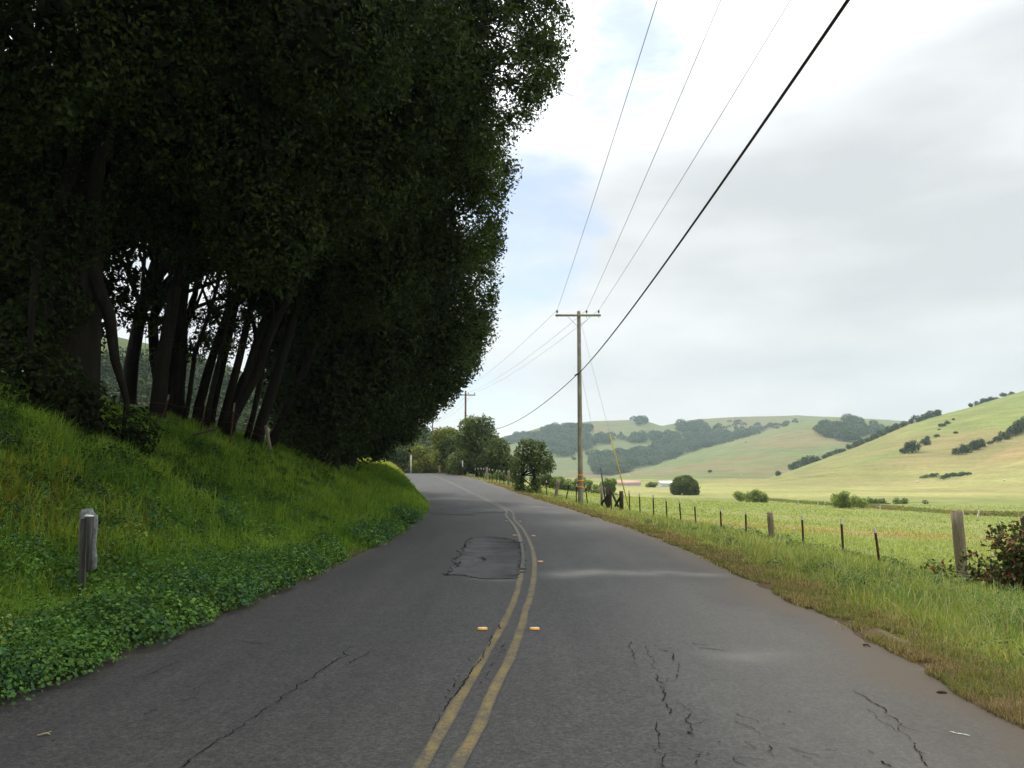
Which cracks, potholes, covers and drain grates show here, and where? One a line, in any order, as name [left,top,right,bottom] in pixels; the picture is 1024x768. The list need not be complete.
crack [853,690,928,766]
crack [628,642,831,767]
crack [182,647,371,767]
